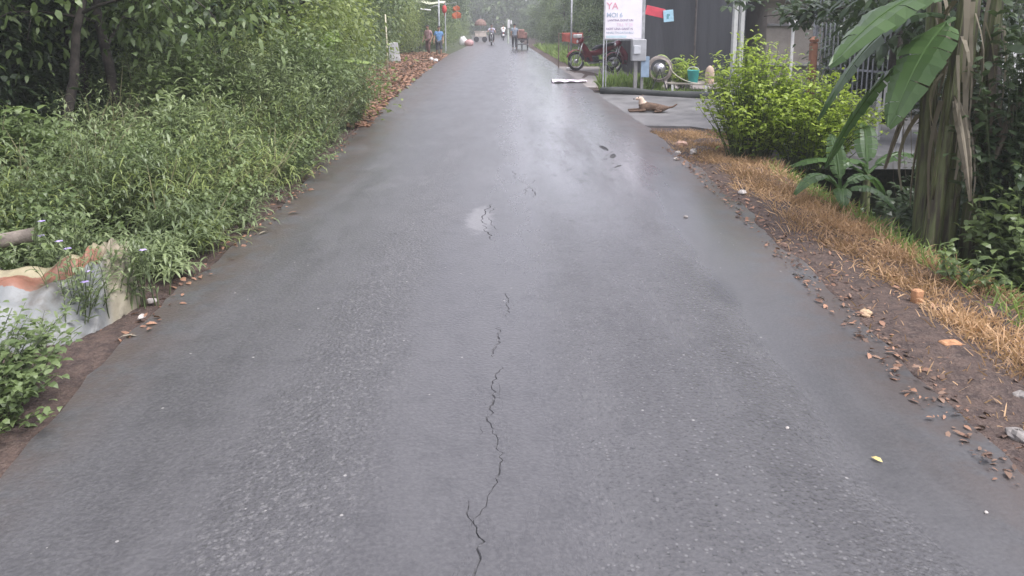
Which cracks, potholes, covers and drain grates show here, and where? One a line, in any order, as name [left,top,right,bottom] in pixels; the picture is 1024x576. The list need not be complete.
crack [466,293,510,576]
